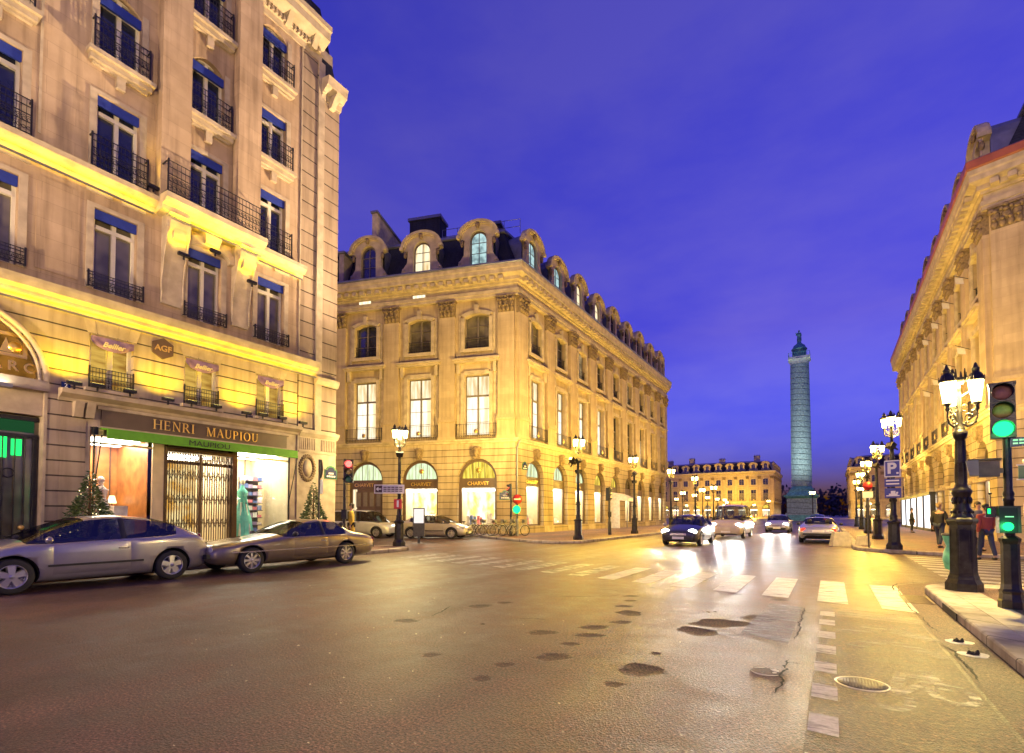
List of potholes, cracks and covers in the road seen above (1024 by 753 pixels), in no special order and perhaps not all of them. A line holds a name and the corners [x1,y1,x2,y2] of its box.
pothole [688,619,754,628]
crack [892,582,993,680]
pothole [676,626,718,636]
manhole cover [834,676,891,692]
pothole [618,663,664,677]
crack [775,660,798,693]
pothole [529,652,574,662]
